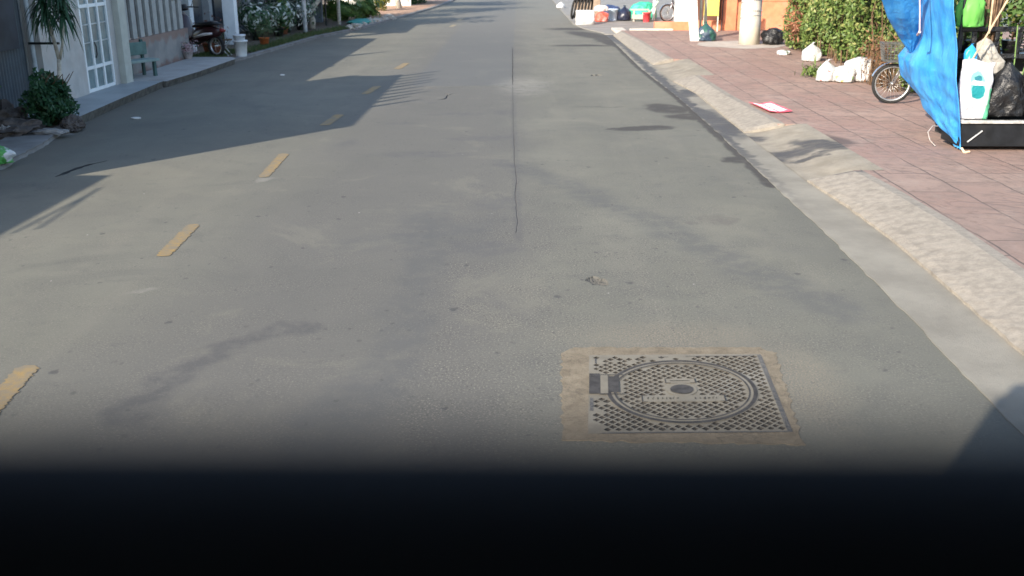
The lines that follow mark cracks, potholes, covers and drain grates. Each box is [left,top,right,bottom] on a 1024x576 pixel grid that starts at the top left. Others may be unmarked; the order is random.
crack [427,48,519,233]
manhole cover [560,347,800,427]
crack [55,161,105,177]
